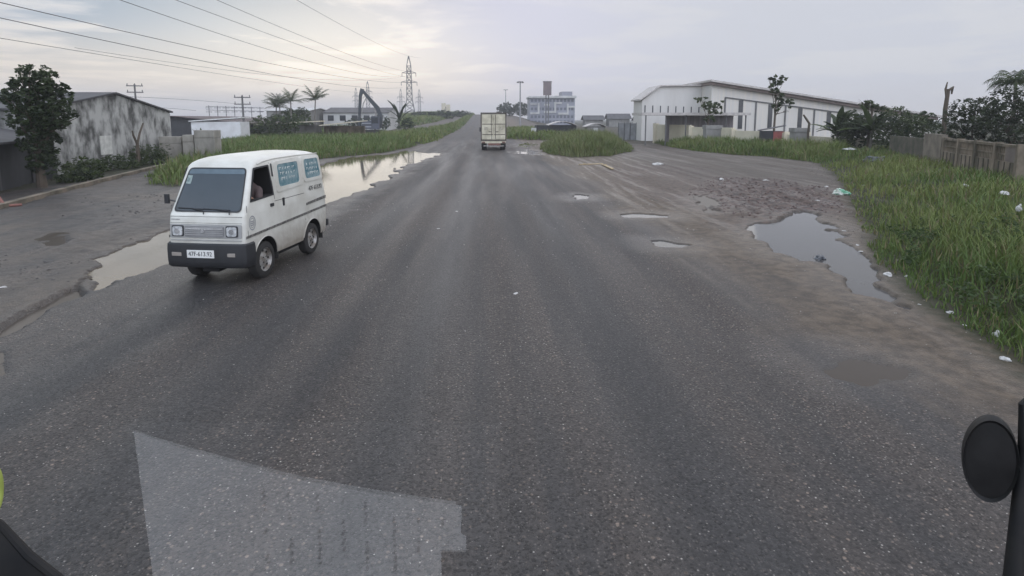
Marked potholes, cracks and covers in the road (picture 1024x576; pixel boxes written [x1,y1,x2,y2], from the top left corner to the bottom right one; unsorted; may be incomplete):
pothole [744,208,919,310]
pothole [817,352,926,390]
pothole [648,240,695,248]
